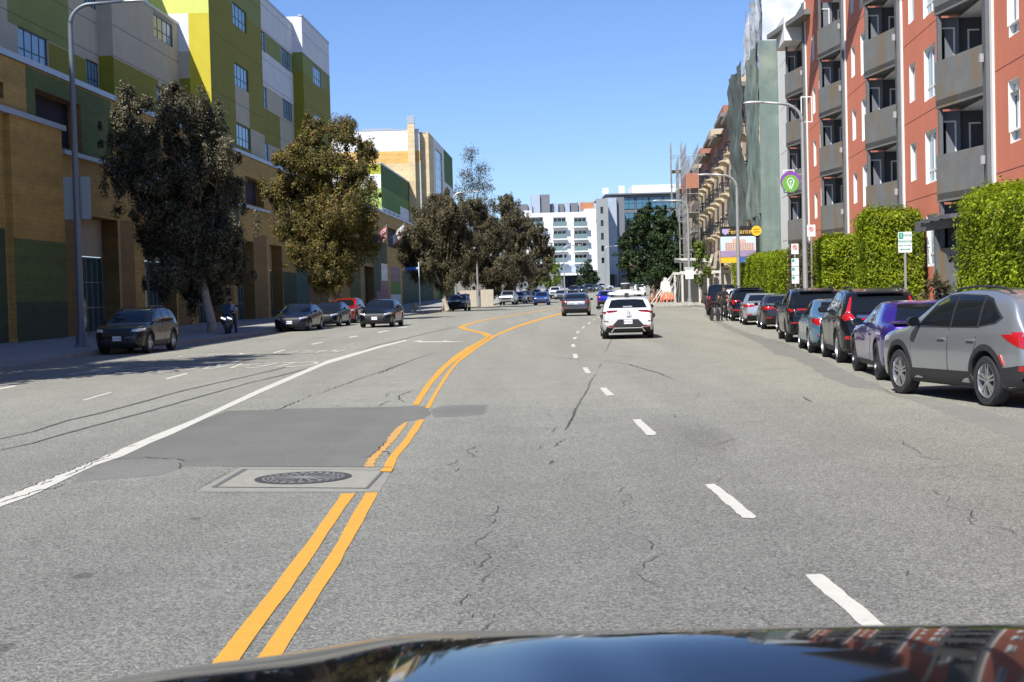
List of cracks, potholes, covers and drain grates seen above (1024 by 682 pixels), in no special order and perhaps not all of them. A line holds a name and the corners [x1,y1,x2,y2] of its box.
crack [539,337,669,464]
crack [618,485,658,584]
crack [444,504,499,630]
manhole cover [195,466,394,492]
